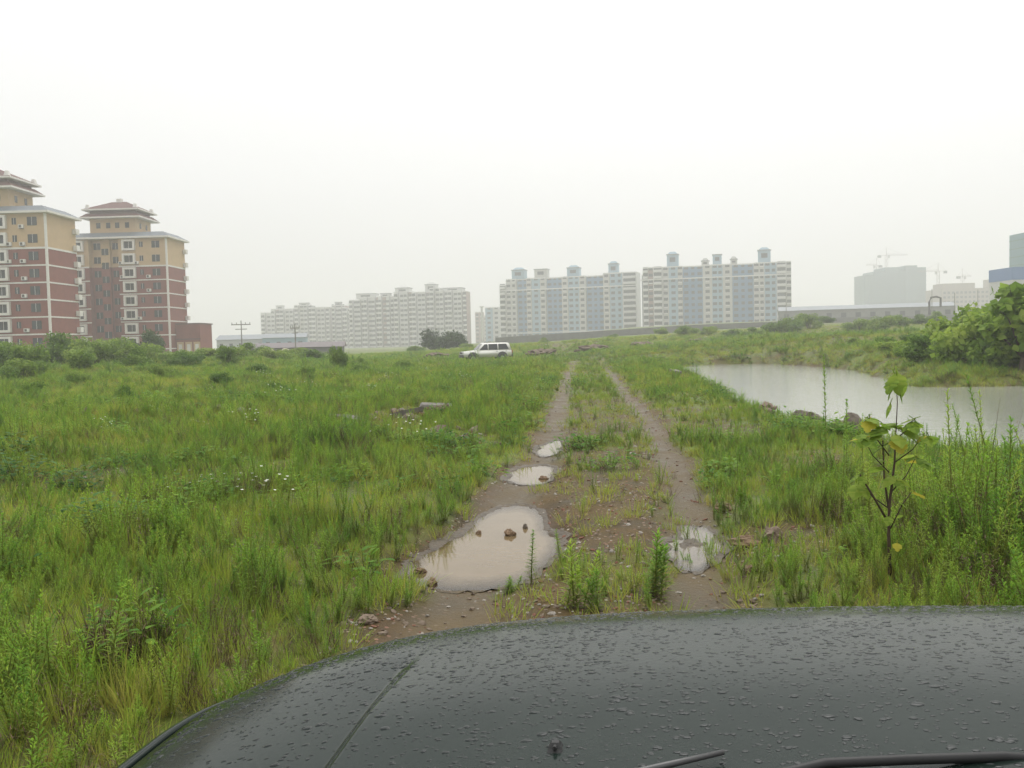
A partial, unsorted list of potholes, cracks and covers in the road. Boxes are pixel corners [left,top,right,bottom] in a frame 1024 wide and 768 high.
pothole [500,464,562,486]
pothole [532,439,566,458]
pothole [393,503,572,594]
pothole [656,525,736,575]
